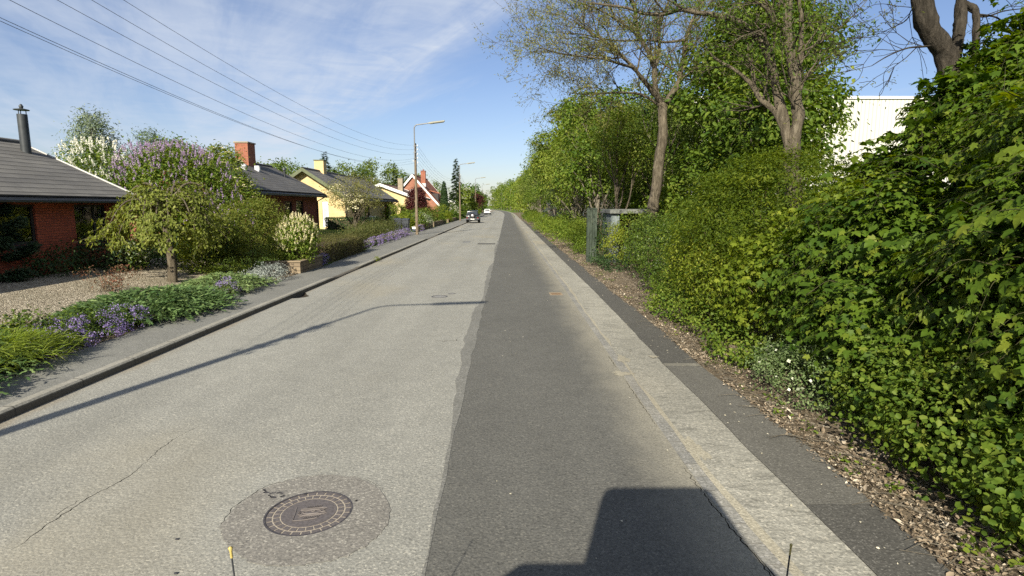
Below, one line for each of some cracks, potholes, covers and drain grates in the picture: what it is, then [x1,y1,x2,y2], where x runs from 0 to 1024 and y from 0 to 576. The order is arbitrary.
manhole cover [263,491,353,536]
crack [19,432,186,546]
